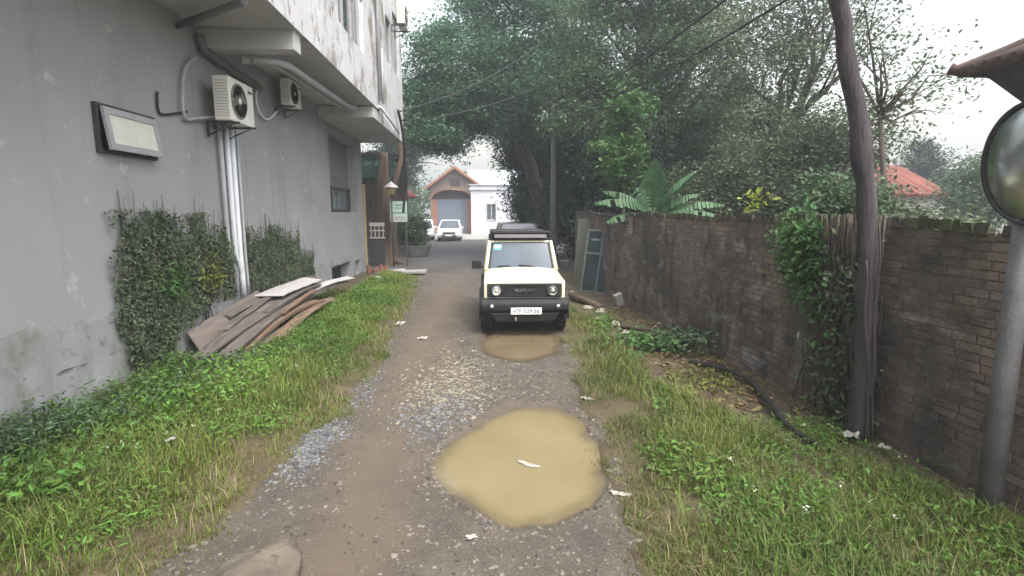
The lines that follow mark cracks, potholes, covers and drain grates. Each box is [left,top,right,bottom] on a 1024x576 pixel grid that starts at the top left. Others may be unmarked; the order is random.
pothole [476,328,566,364]
pothole [427,400,615,531]
